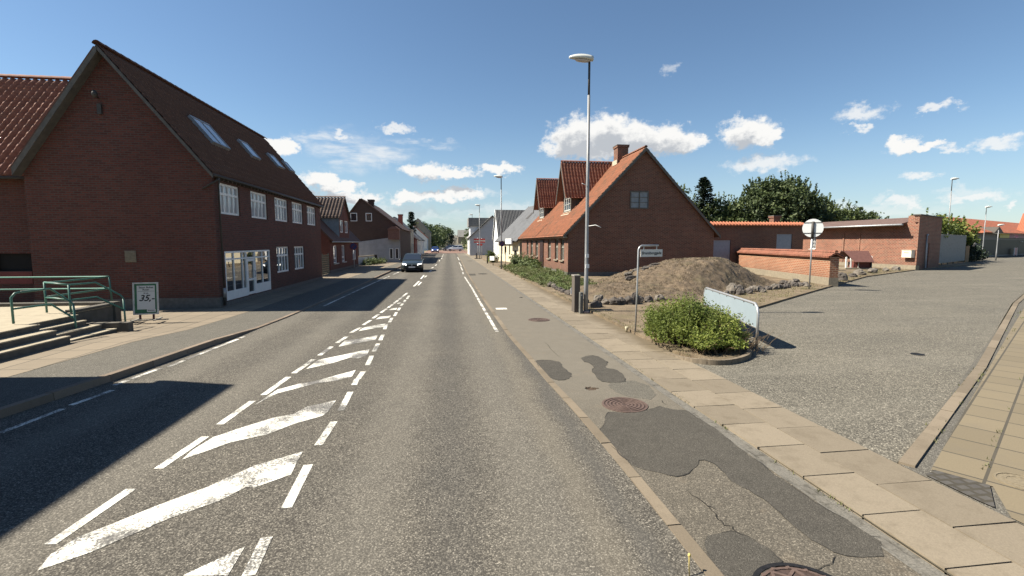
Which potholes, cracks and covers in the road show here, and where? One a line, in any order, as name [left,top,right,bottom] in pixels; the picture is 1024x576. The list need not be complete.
manhole cover [602,397,648,413]
manhole cover [752,562,832,576]
